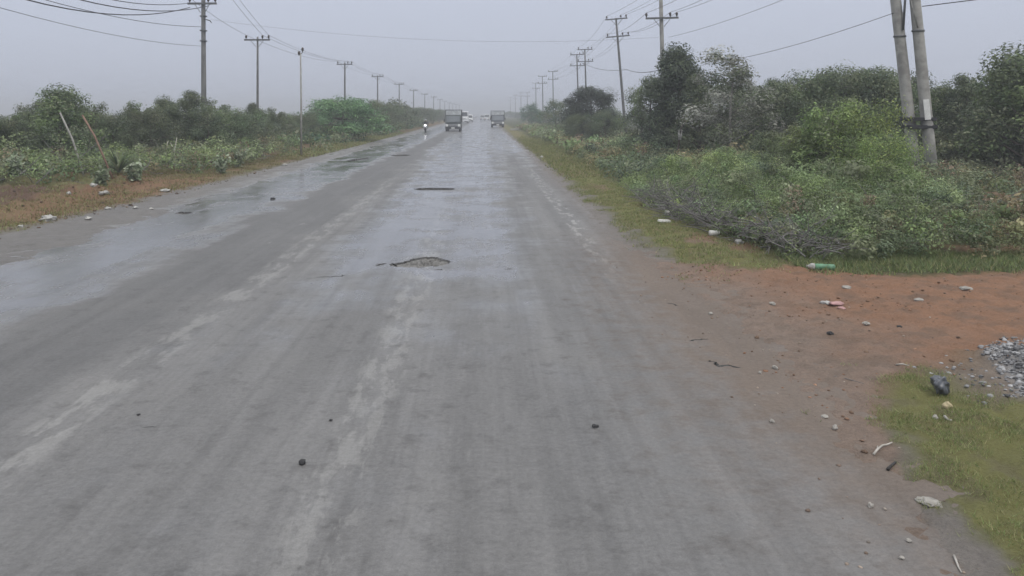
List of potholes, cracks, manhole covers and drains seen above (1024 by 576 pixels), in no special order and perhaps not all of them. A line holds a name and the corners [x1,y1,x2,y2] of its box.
pothole [389,257,451,268]
